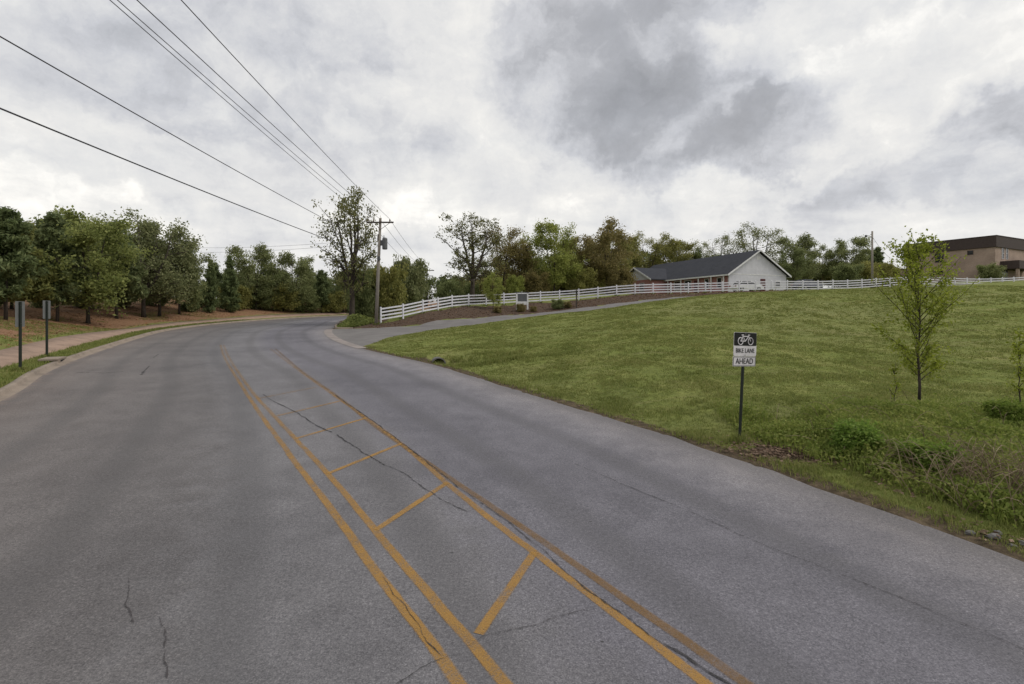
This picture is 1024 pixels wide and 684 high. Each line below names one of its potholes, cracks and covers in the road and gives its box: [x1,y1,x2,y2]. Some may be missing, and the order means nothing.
crack [159,616,168,677]
crack [577,464,1024,649]
crack [385,580,463,684]
crack [263,394,466,511]
crack [124,577,134,623]
